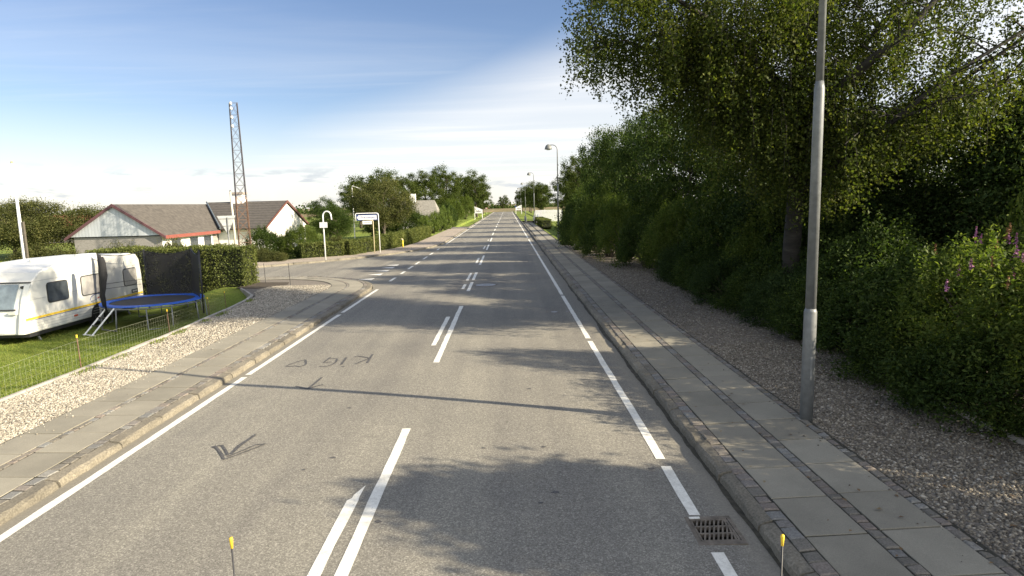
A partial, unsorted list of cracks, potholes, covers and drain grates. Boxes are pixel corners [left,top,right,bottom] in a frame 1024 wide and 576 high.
drain grate [684,516,749,545]
